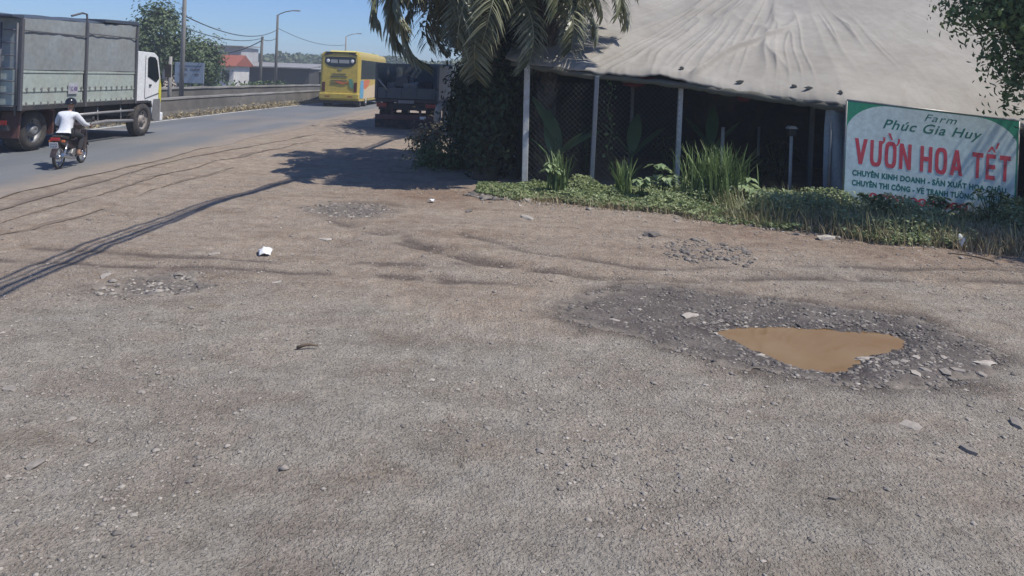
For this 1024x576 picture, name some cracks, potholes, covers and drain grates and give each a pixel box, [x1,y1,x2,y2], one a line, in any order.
pothole [88,271,219,300]
pothole [296,203,389,218]
pothole [556,283,1010,390]
